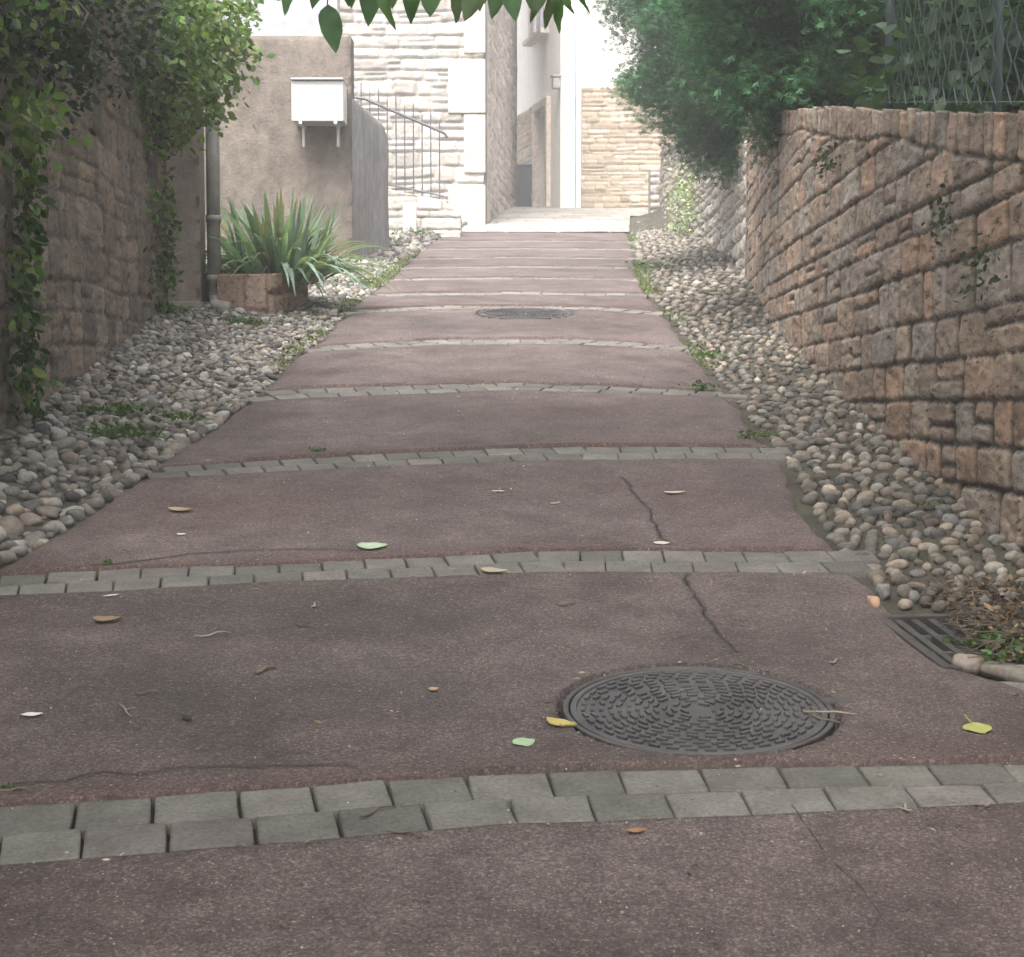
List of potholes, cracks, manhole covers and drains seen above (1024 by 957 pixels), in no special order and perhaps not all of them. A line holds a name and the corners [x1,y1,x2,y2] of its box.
crack [90,548,362,566]
crack [791,804,920,957]
crack [678,572,743,653]
crack [0,762,358,788]
manhole cover [478,307,573,319]
manhole cover [563,666,856,756]
drain grate [880,613,1024,679]
crack [617,476,673,545]
